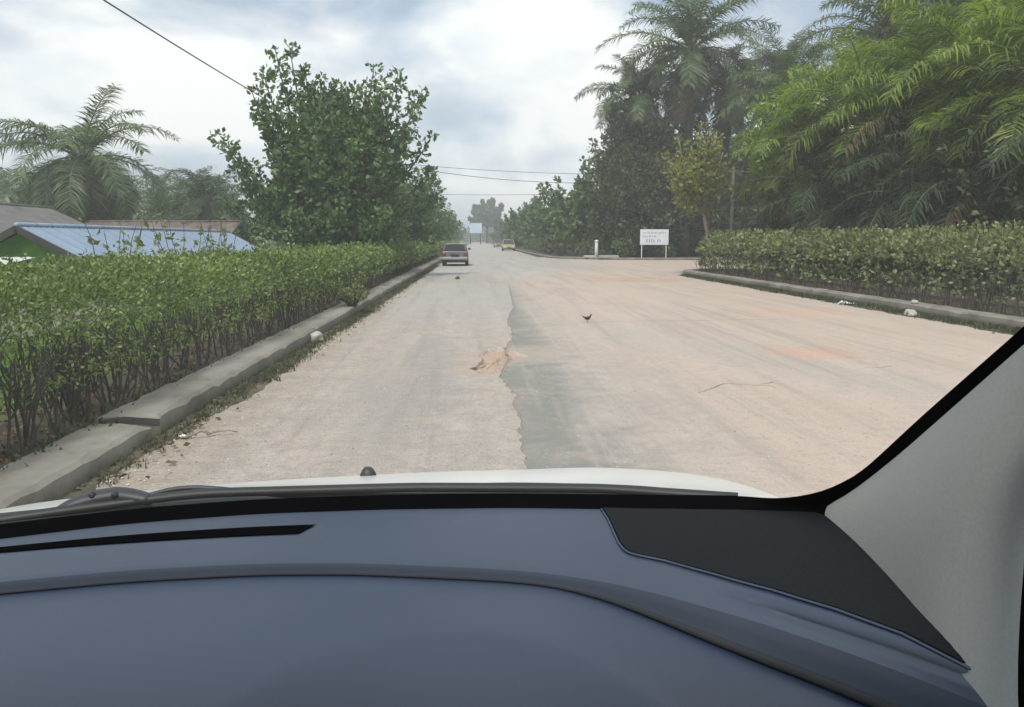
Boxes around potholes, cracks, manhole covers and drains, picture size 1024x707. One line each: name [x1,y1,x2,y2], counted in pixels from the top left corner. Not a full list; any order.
crack [699,382,776,393]
pothole [469,347,529,373]
